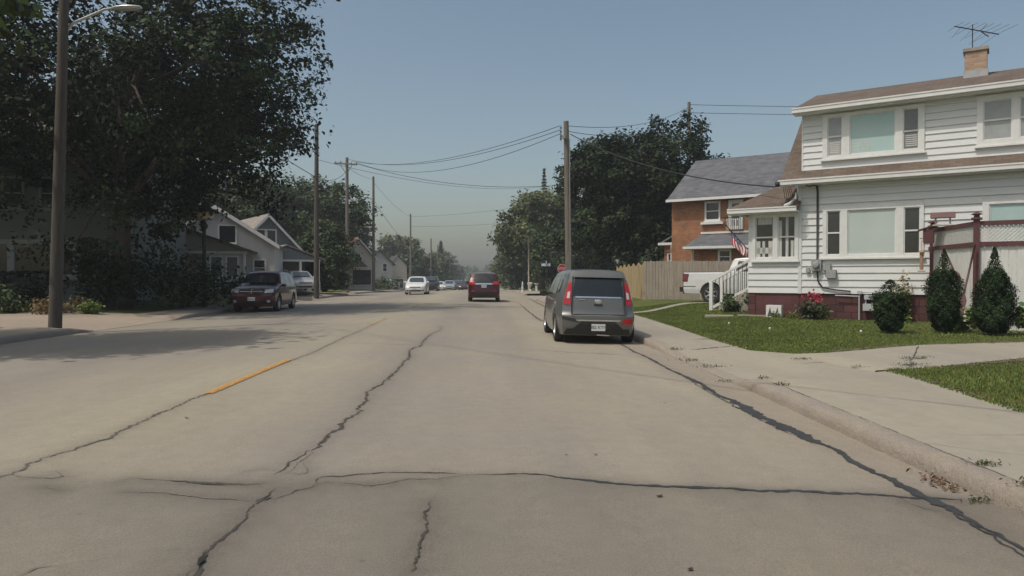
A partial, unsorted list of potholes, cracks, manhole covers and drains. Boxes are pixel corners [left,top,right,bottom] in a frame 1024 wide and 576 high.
crack [17,326,442,576]
